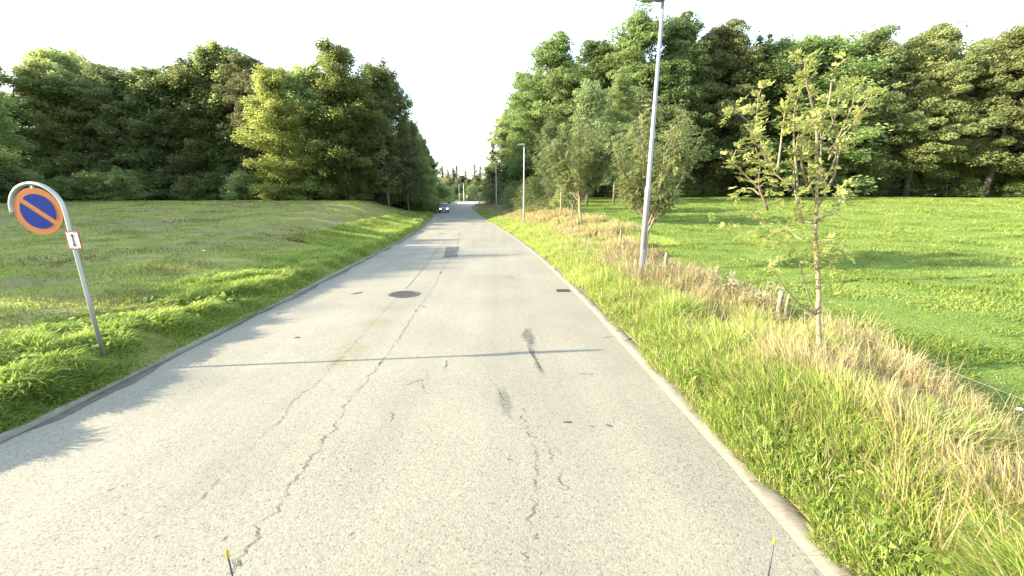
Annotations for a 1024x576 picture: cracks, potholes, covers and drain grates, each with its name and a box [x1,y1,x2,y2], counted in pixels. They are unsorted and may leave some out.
crack [221,237,459,575]
crack [520,408,569,560]
